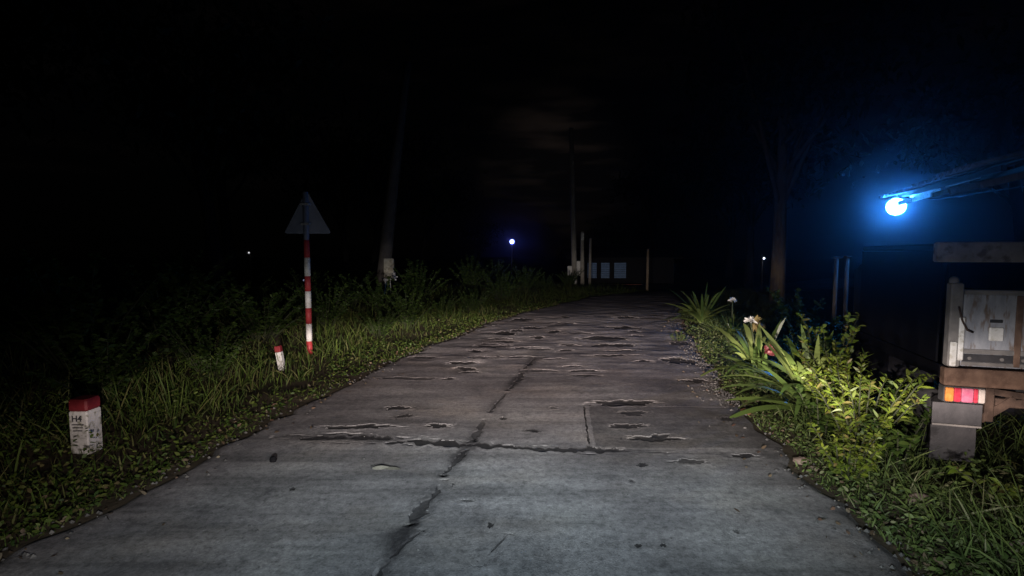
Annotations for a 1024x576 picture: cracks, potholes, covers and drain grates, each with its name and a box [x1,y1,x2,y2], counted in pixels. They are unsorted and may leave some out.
pothole [580,398,670,408]
pothole [619,432,693,444]
pothole [664,456,713,466]
pothole [654,356,713,366]
crack [476,533,515,565]
pothole [310,422,413,431]
pothole [602,422,656,431]
pothole [419,422,456,430]
